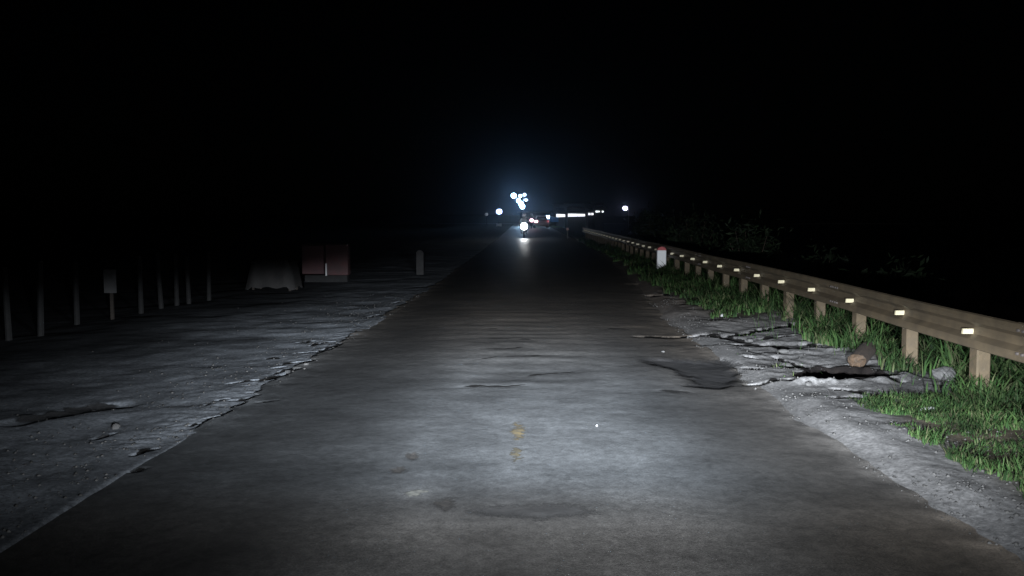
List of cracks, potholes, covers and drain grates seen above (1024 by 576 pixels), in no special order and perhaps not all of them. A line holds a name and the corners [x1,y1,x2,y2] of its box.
crack [471,328,542,361]
crack [464,372,572,387]
crack [207,341,340,405]
pothole [641,357,742,389]
pothole [794,366,891,380]
crack [836,390,866,399]
crack [644,323,826,386]
